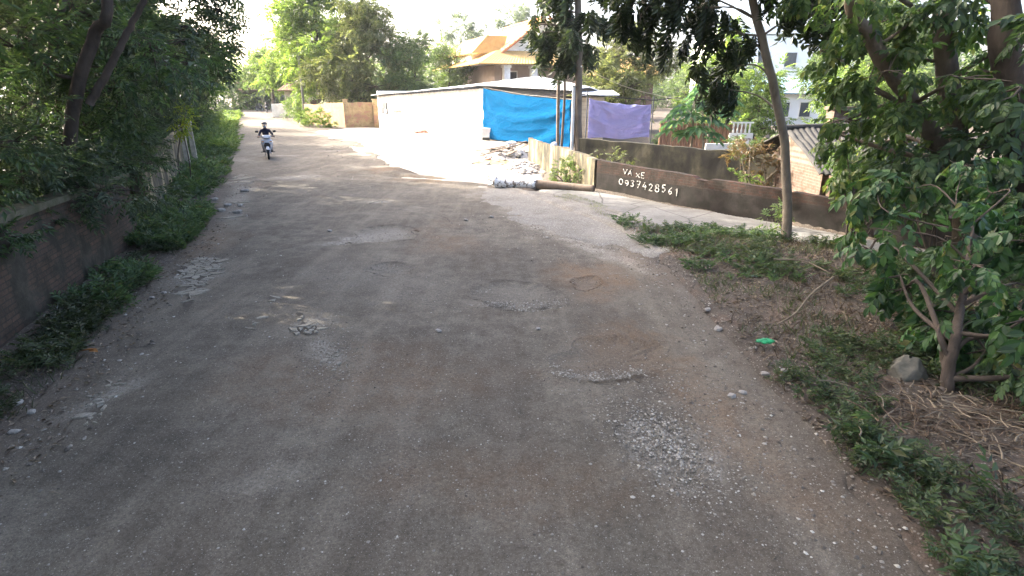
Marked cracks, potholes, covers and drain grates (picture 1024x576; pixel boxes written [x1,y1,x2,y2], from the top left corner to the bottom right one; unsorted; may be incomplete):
pothole [612,407,720,498]
pothole [547,334,671,385]
